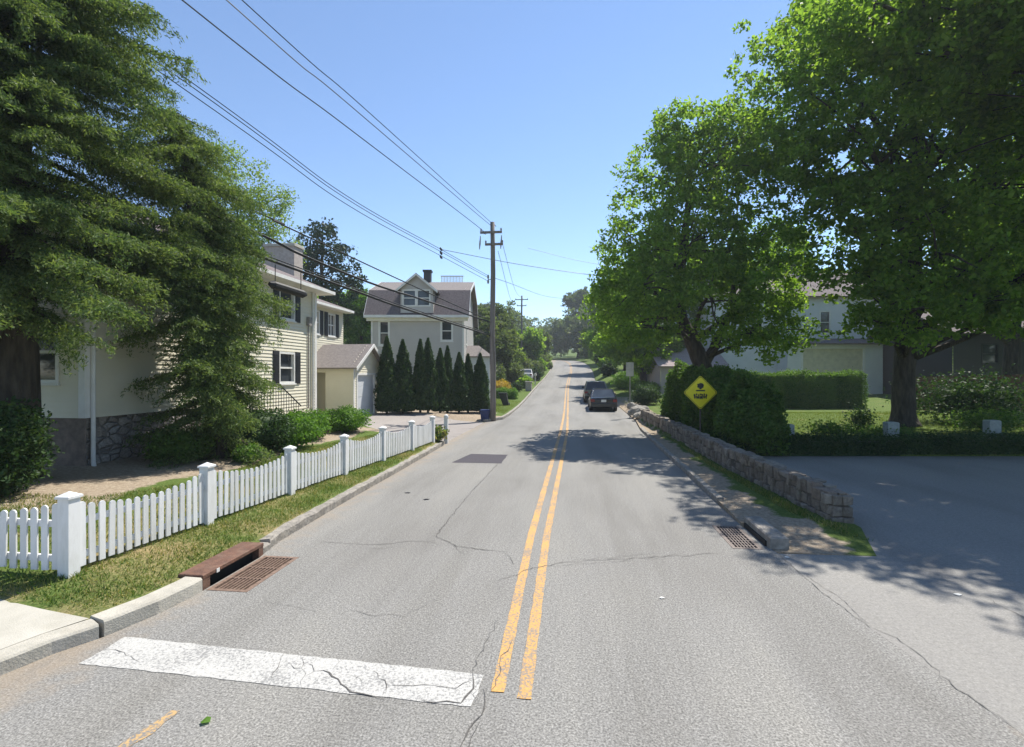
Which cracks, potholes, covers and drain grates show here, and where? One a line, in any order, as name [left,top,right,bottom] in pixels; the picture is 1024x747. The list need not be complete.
drain grate [712,516,789,550]
crack [333,465,702,579]
drain grate [178,542,299,592]
